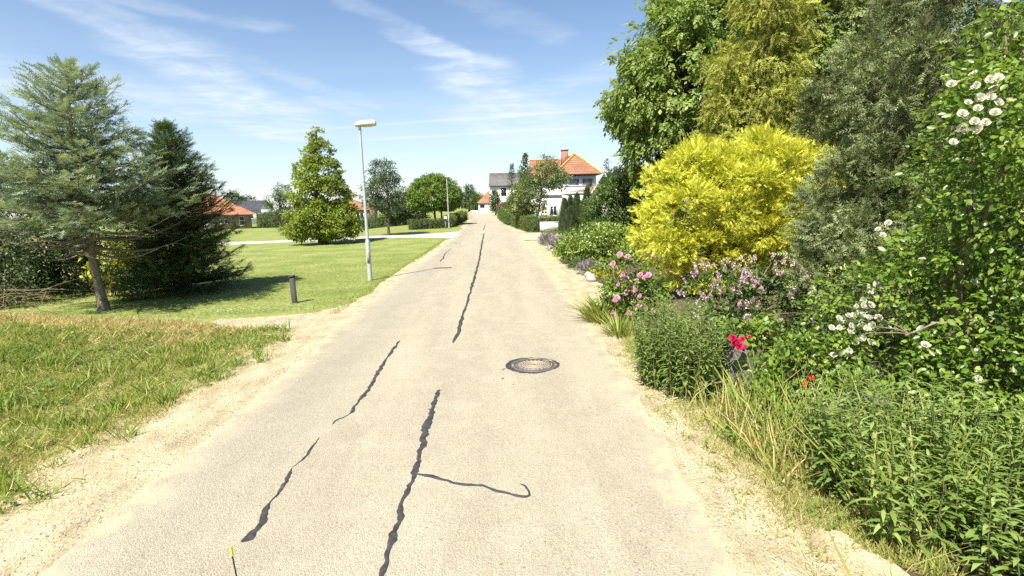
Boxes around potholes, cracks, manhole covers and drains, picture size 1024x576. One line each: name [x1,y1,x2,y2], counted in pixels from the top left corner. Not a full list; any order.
manhole cover [505,357,560,374]
